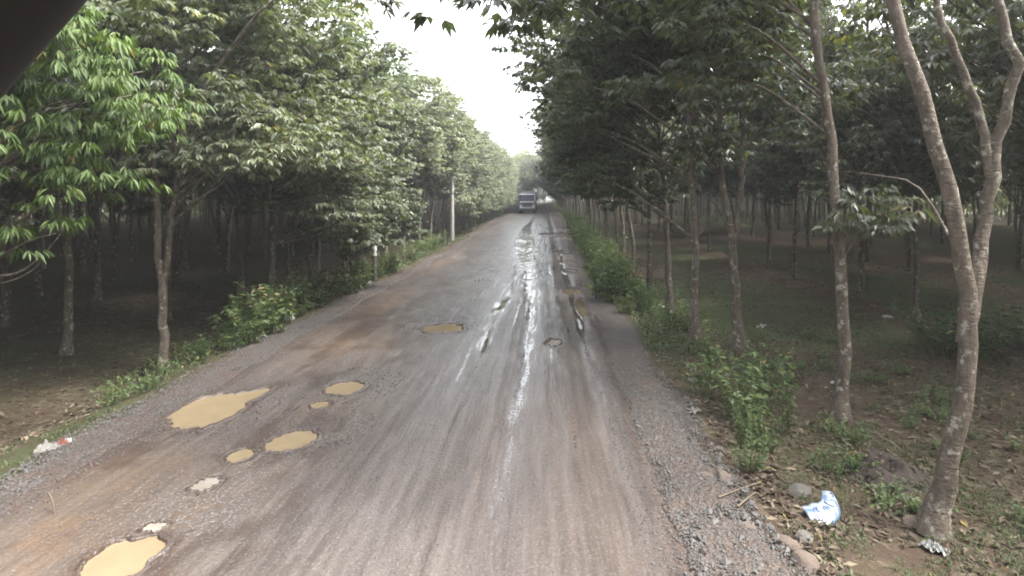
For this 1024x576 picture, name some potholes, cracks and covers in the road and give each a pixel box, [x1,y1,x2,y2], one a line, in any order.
pothole [72,531,176,576]
pothole [258,428,323,454]
pothole [223,447,258,464]
pothole [158,384,280,433]
pothole [573,295,595,321]
pothole [184,475,226,496]
pothole [560,286,587,296]
pothole [136,519,172,534]
pothole [416,322,467,334]
pothole [321,380,369,397]
pothole [308,400,332,410]
pothole [543,338,563,347]
